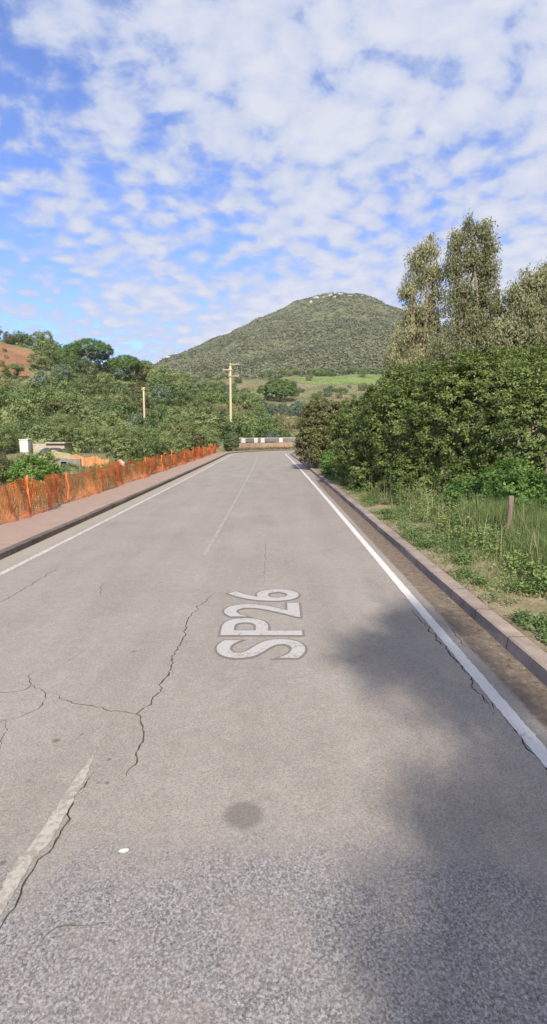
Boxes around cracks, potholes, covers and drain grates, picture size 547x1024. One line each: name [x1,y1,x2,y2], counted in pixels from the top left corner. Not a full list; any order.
crack [411,609,547,770]
crack [0,589,214,780]
